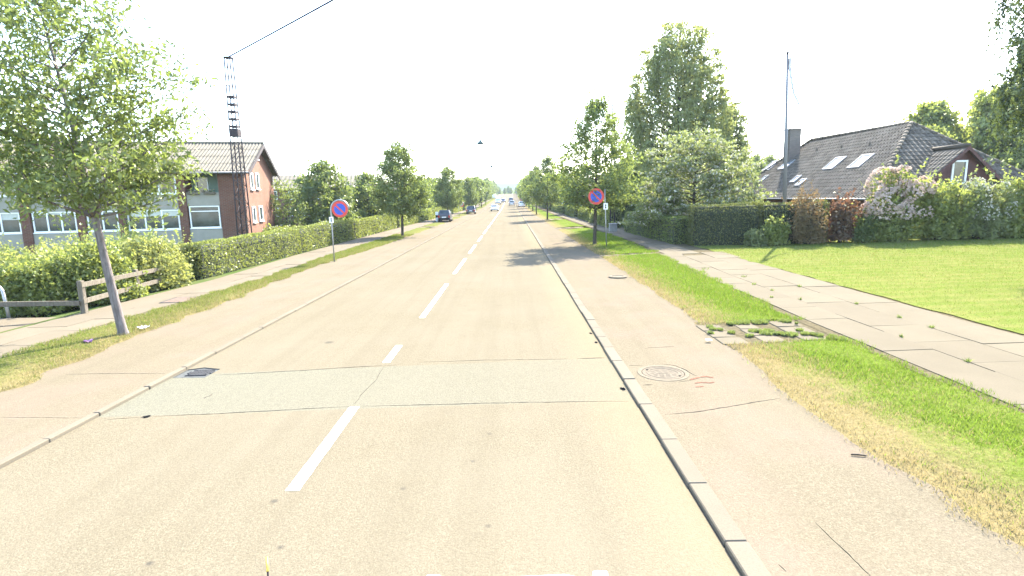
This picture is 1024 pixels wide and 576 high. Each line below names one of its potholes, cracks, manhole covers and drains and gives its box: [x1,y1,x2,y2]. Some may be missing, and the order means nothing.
manhole cover [173,367,219,378]
manhole cover [637,365,690,381]
crack [779,522,870,576]
